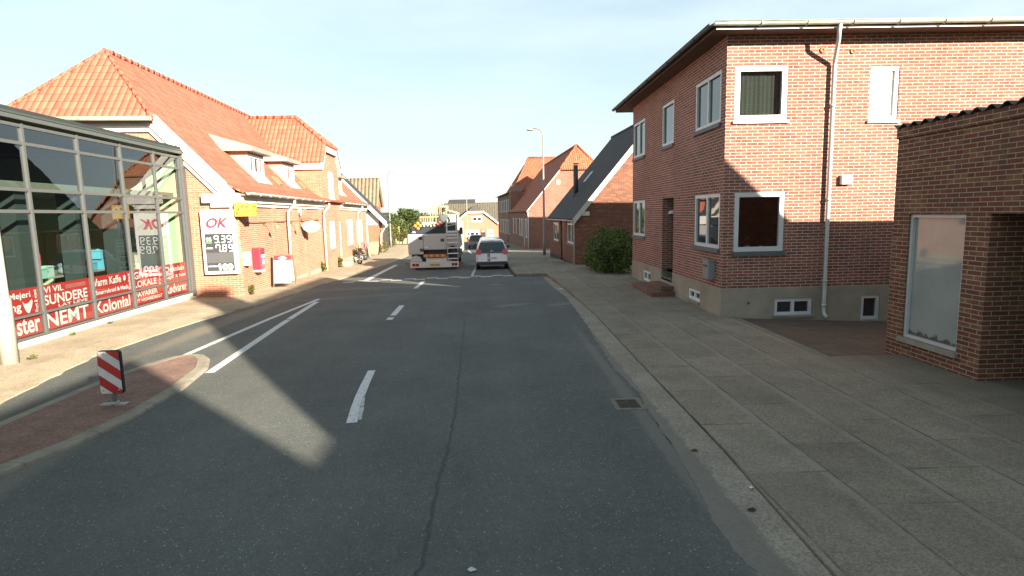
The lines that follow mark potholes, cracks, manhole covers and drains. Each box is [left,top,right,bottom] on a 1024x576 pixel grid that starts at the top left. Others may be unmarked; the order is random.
crack [414,322,465,576]
drain grate [609,398,647,410]
